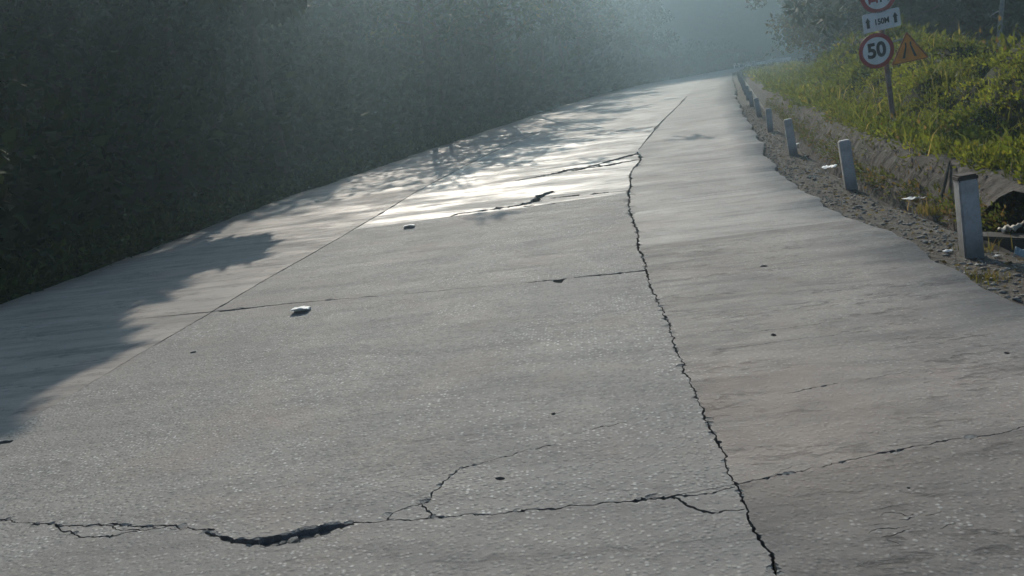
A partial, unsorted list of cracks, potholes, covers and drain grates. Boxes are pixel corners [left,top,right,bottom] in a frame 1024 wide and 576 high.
crack [0,126,1024,576]
